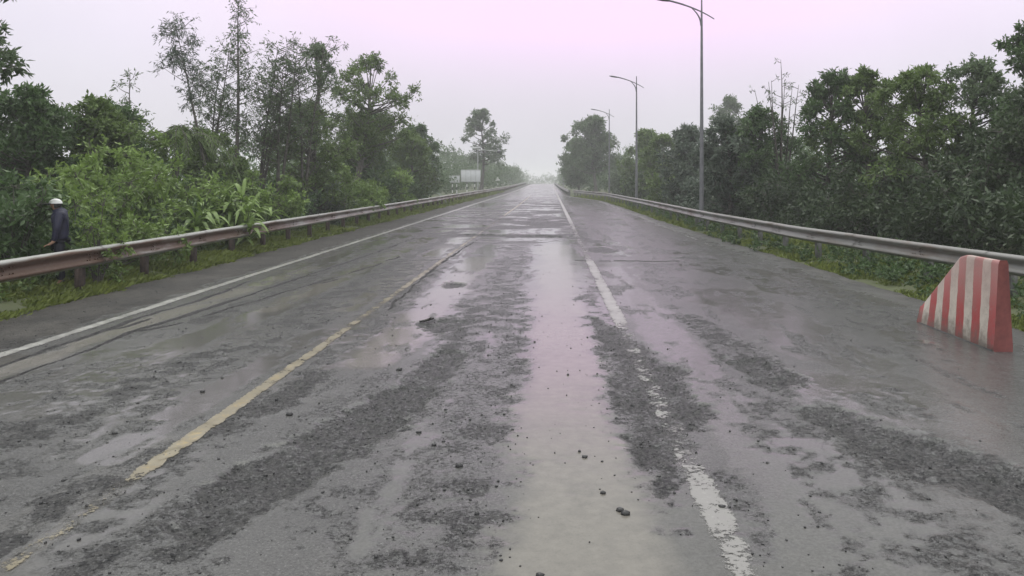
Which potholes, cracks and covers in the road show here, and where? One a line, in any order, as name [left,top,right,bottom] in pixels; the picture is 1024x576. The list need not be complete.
pothole [410,315,481,337]
